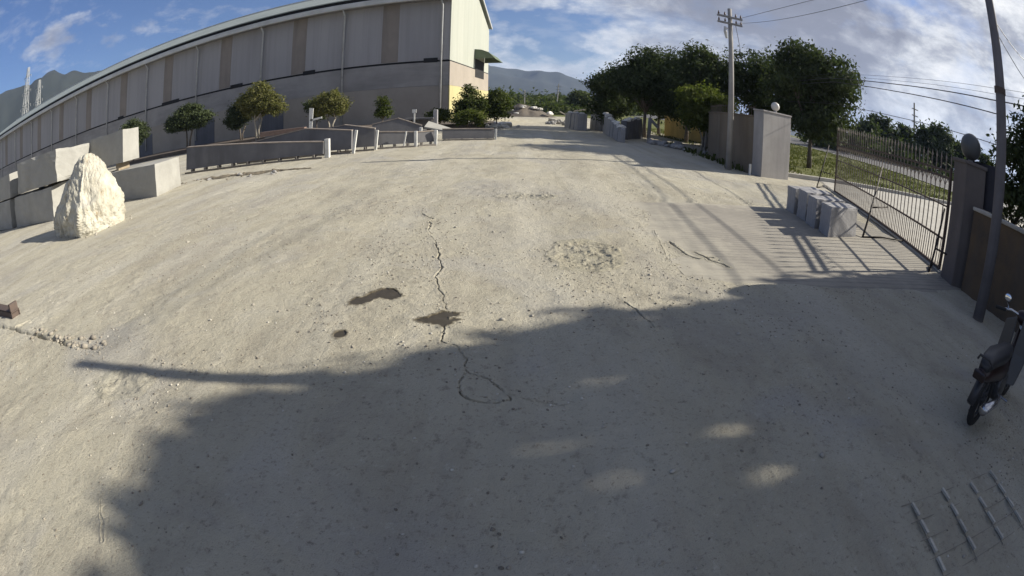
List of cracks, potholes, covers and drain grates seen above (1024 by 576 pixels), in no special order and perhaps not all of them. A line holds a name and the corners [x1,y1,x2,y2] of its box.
pothole [409,309,468,330]
crack [651,230,733,269]
crack [96,497,108,545]
crack [619,300,661,332]
pothole [343,286,408,307]
pothole [328,328,352,341]
crack [418,211,576,411]
